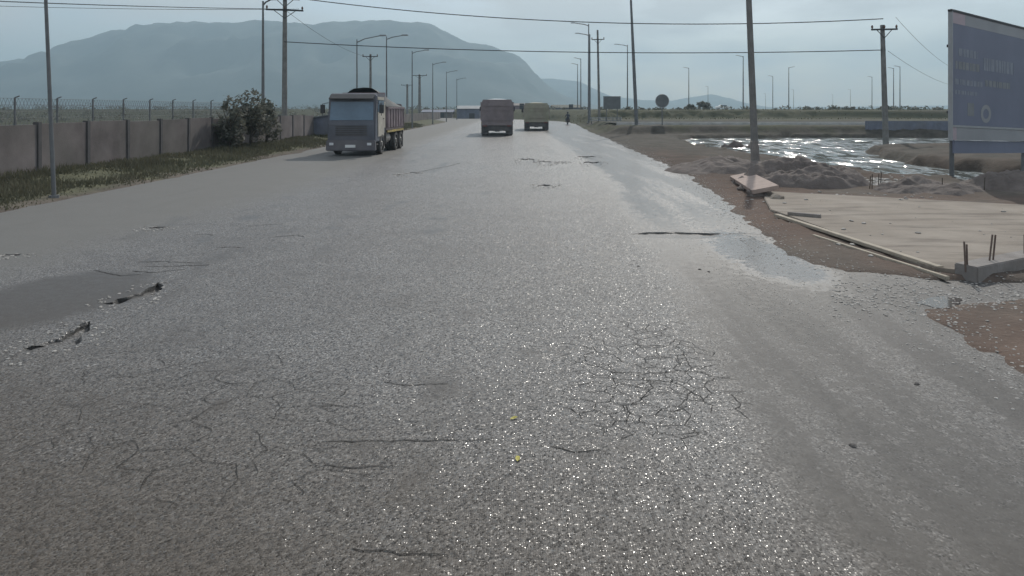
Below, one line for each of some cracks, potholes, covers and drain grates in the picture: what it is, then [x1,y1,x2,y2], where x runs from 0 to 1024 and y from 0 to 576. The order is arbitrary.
pothole [103,282,163,307]
crack [13,354,394,504]
pothole [22,321,91,355]
crack [97,234,243,276]
crack [560,320,750,448]
